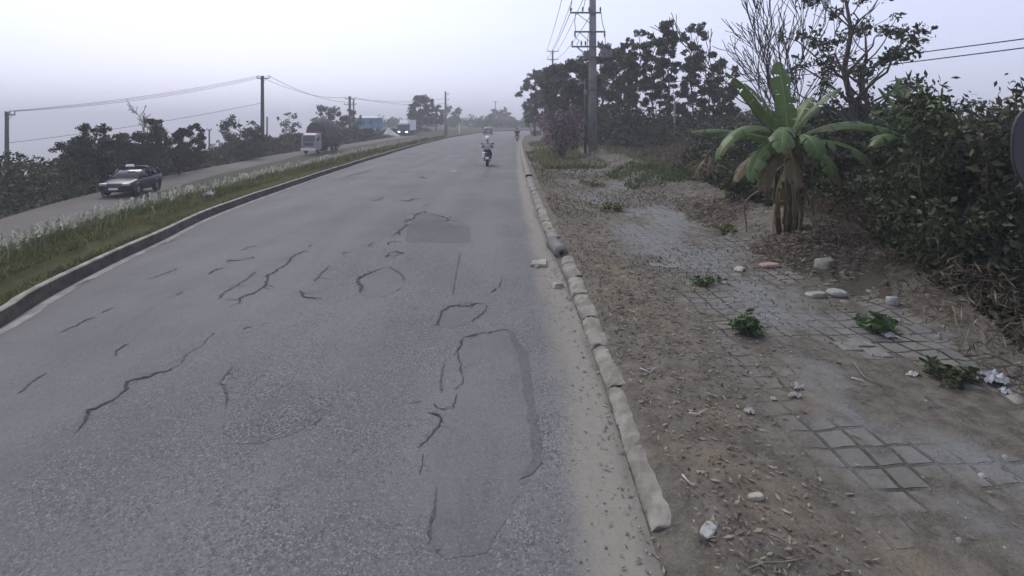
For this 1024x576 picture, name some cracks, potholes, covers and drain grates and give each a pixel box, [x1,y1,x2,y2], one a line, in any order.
crack [62,332,215,437]
crack [208,244,312,307]
crack [299,252,346,299]
crack [414,360,457,552]
